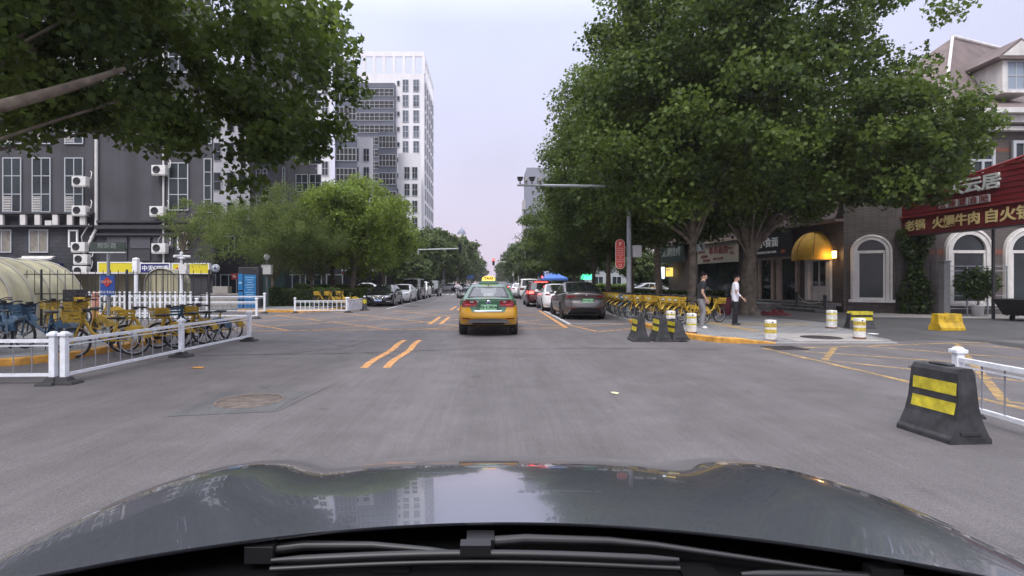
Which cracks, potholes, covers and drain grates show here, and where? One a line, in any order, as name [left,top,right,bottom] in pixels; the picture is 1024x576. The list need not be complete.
manhole cover [213,393,285,408]
